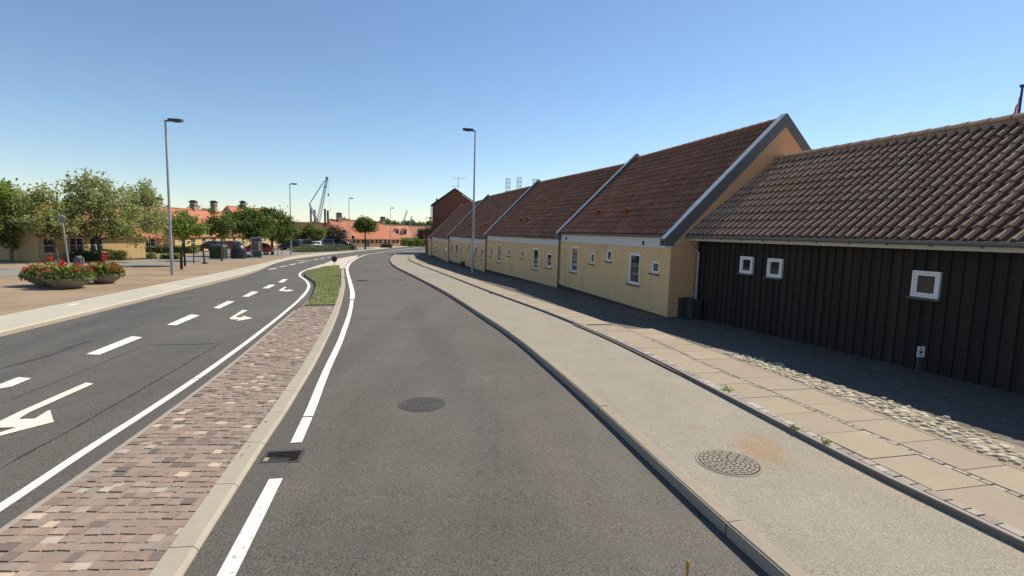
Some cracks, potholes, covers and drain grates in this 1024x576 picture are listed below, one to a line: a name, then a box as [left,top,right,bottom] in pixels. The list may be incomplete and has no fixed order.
drain grate [258,449,306,464]
manhole cover [398,397,447,412]
manhole cover [695,449,764,477]
